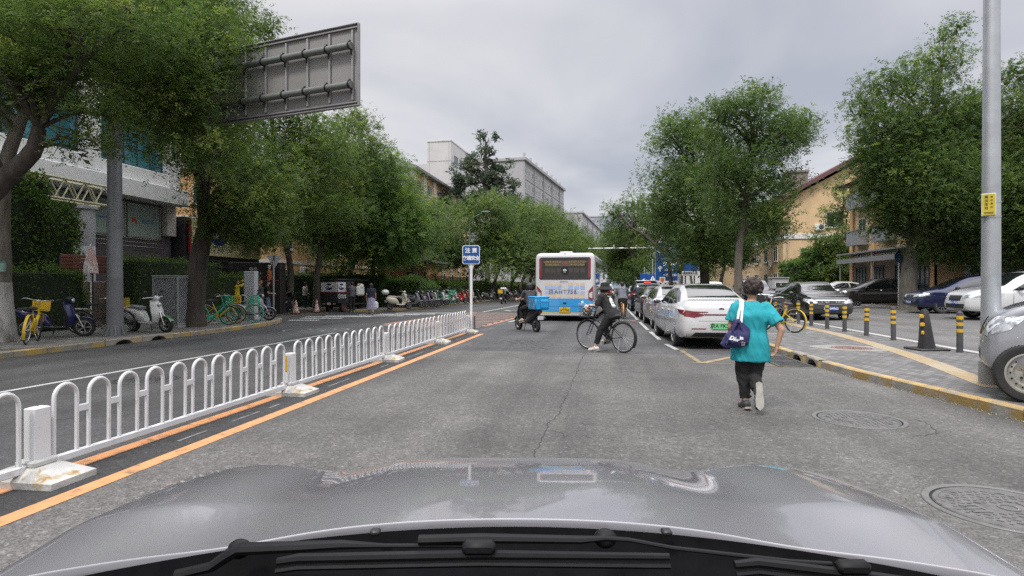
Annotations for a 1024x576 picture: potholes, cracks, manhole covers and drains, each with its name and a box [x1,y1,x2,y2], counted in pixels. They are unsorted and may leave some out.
manhole cover [921,484,1024,534]
drain grate [791,351,810,363]
manhole cover [812,410,909,430]
drain grate [806,355,827,368]
crack [466,339,672,457]
drain grate [768,356,815,367]
